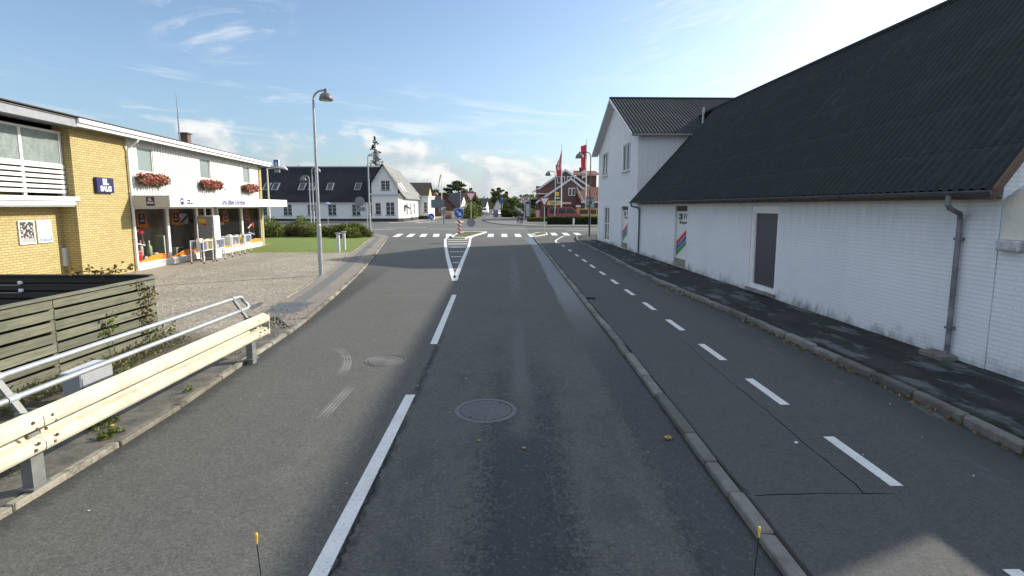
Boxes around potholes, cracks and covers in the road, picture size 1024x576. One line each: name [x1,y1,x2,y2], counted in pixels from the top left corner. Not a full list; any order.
manhole cover [454,399,517,423]
crack [687,344,887,496]
manhole cover [364,354,406,367]
